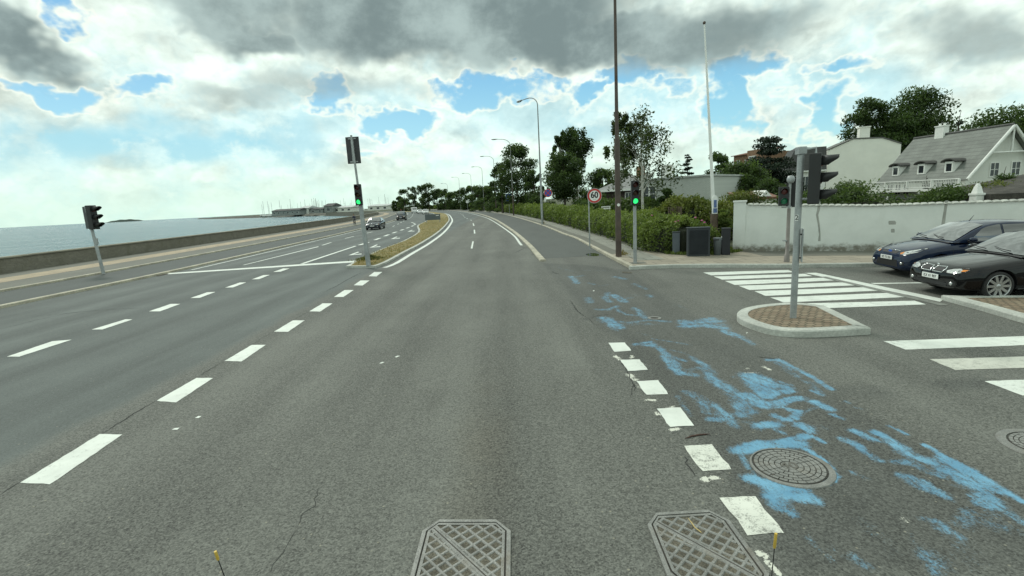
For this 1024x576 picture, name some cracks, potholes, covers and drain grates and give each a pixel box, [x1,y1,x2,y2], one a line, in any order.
manhole cover [749,448,837,489]
crack [268,484,326,573]
manhole cover [995,429,1024,454]
